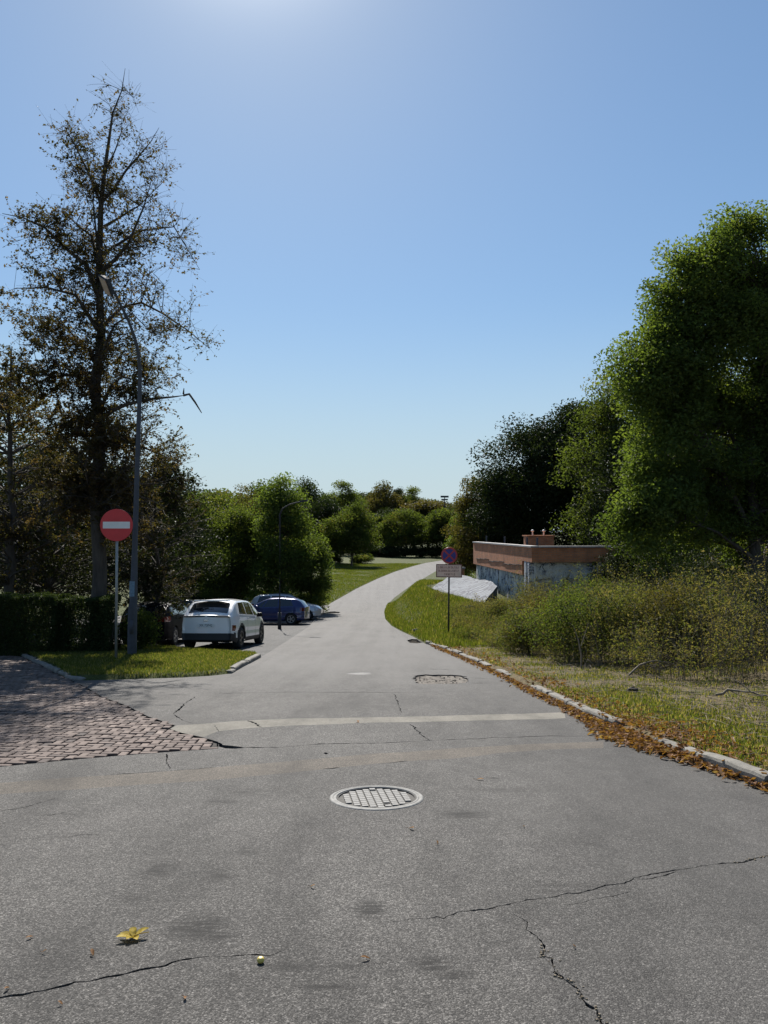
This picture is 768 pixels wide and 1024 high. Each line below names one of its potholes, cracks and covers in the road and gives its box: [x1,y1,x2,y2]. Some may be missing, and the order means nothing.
manhole cover [329,785,424,811]
crack [0,951,281,998]
crack [392,855,768,1024]
pothole [412,674,468,684]
